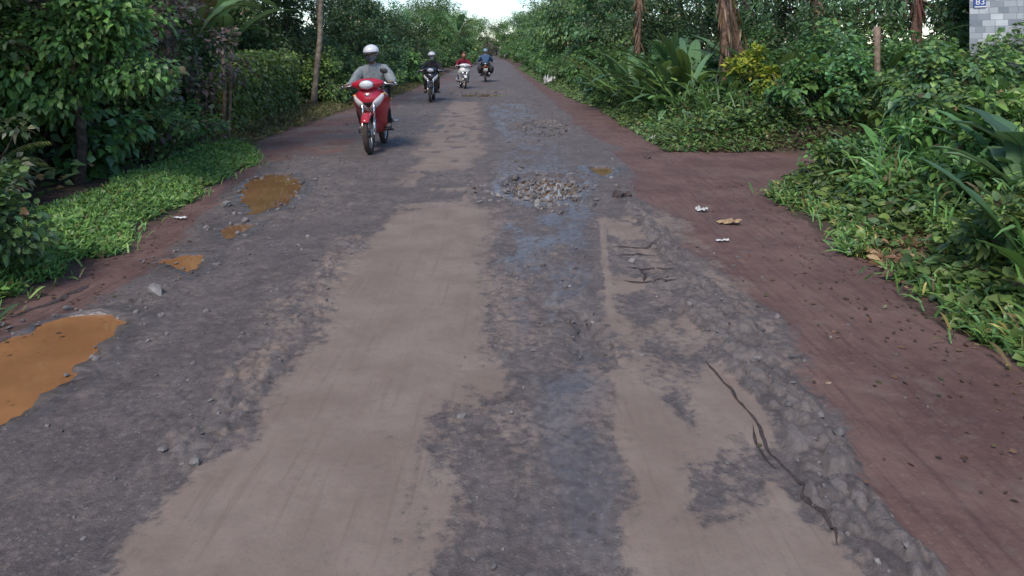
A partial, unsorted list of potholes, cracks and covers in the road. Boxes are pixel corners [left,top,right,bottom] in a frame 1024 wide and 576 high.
pothole [203,217,266,243]
pothole [0,305,164,439]
crack [616,242,676,283]
pothole [464,166,634,214]
pothole [138,249,226,280]
pothole [512,119,574,137]
crack [706,361,838,544]
pothole [223,172,318,217]
